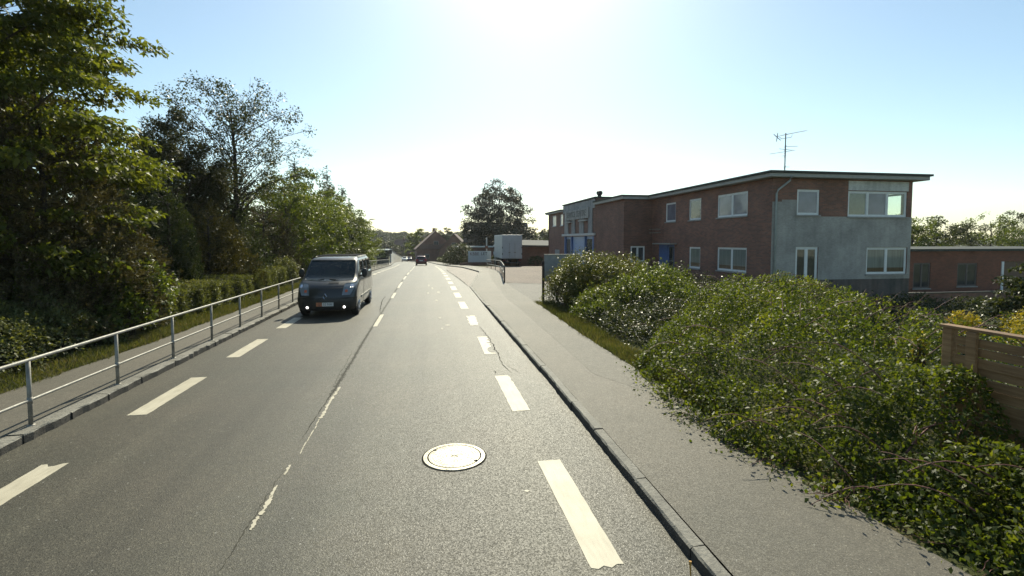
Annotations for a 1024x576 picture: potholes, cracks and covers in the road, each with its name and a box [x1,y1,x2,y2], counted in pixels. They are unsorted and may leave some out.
manhole cover [422,443,487,471]
